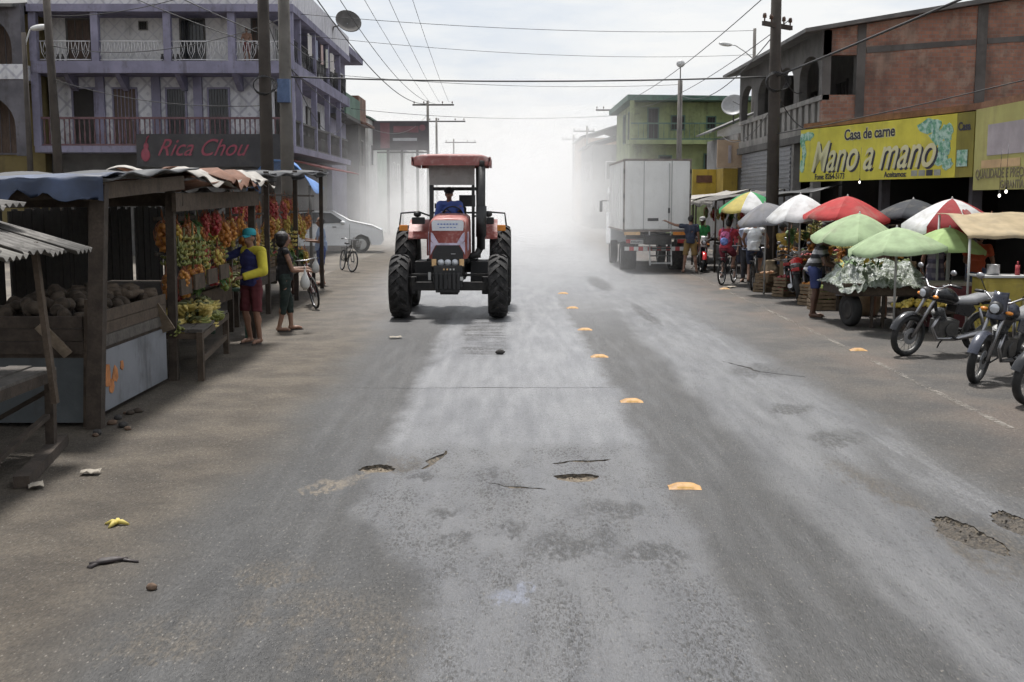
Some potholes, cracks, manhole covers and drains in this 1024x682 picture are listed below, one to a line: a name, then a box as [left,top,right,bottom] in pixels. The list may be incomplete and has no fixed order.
pothole [554,474,599,482]
pothole [930,516,1010,556]
pothole [358,464,395,473]
pothole [989,510,1024,536]
